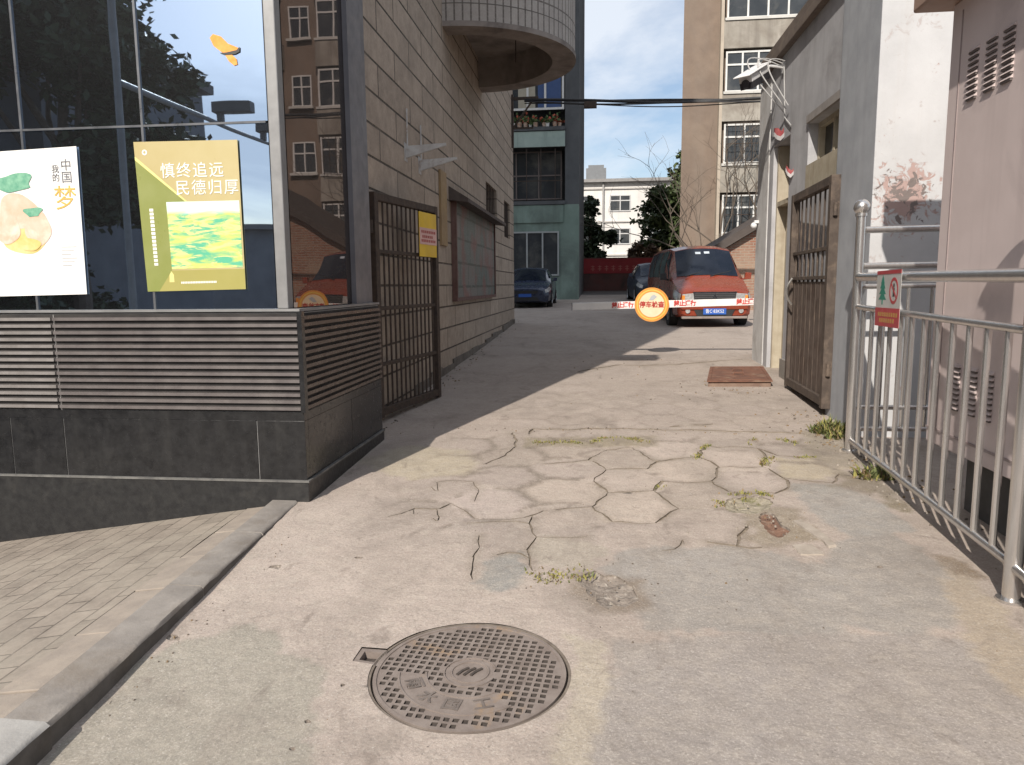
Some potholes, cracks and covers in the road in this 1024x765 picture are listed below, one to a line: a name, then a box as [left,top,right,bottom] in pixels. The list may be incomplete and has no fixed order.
crack [388,480,578,579]
pothole [578,571,639,609]
manhole cover [707,366,773,387]
crack [486,424,799,464]
manhole cover [353,624,571,734]
